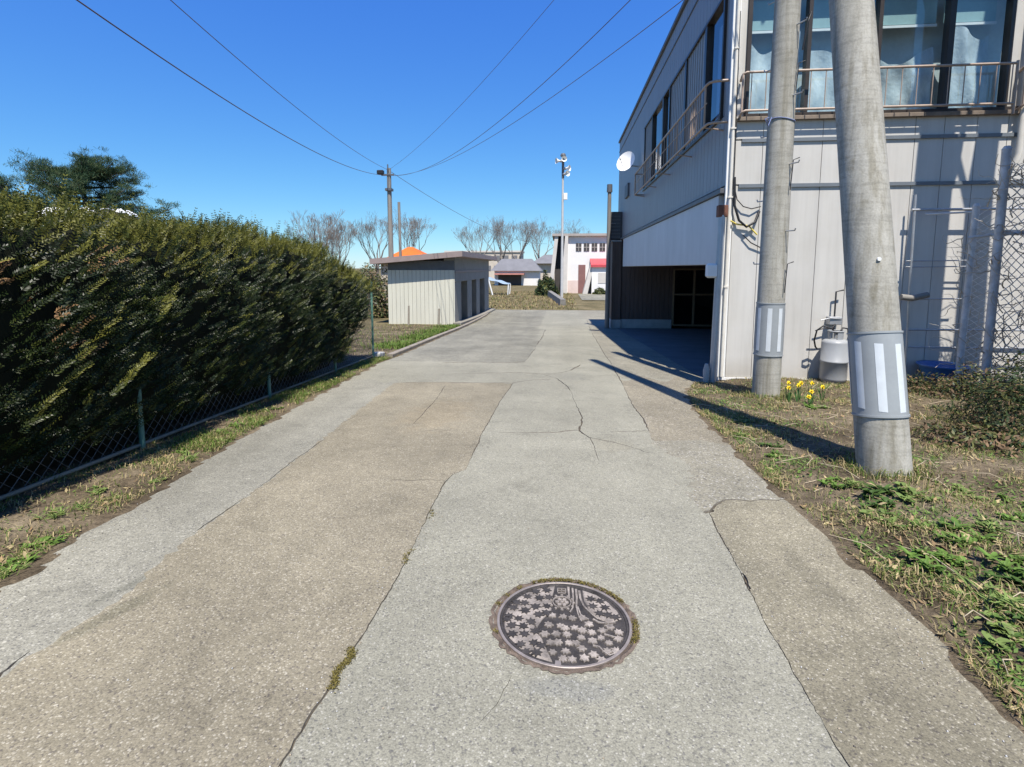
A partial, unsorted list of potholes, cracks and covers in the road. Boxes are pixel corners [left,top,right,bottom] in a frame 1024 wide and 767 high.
crack [704,499,850,767]
crack [278,321,649,767]
manhole cover [489,578,640,675]
